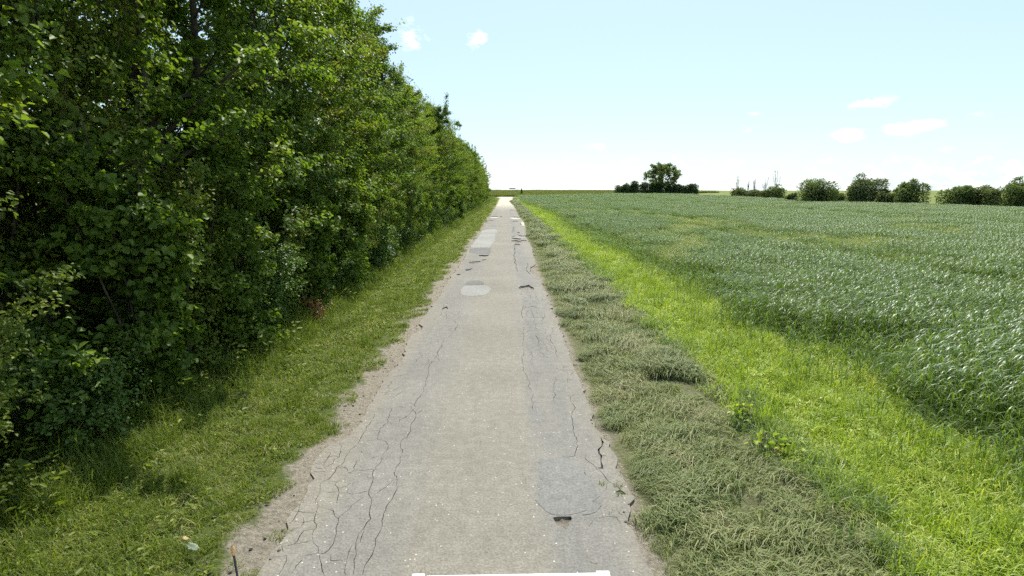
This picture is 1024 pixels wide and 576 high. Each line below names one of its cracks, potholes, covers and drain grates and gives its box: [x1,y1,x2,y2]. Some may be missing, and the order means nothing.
crack [521,292,618,487]
crack [276,308,463,575]
pothole [553,516,572,529]
